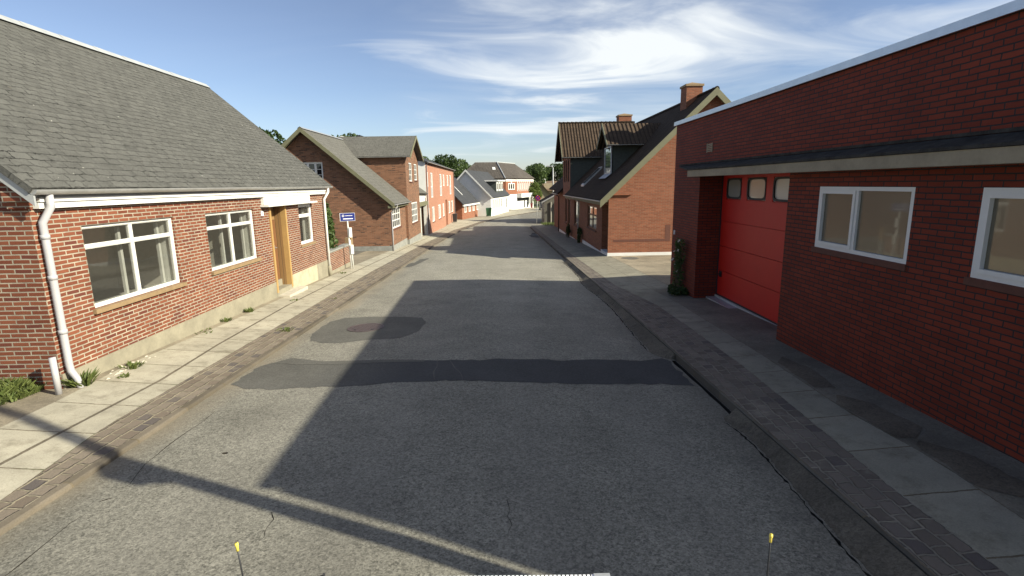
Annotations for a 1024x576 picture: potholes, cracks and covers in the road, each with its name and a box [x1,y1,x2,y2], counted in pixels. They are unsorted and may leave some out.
crack [120,411,215,490]
manhole cover [347,323,384,332]
